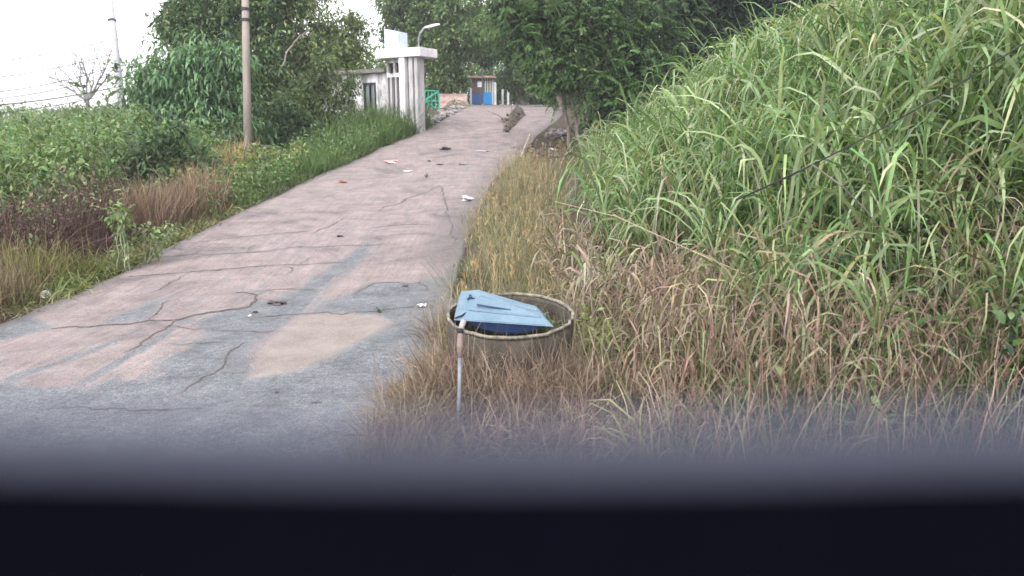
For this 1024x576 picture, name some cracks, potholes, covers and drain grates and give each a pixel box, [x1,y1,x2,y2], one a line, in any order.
crack [50,281,432,411]
